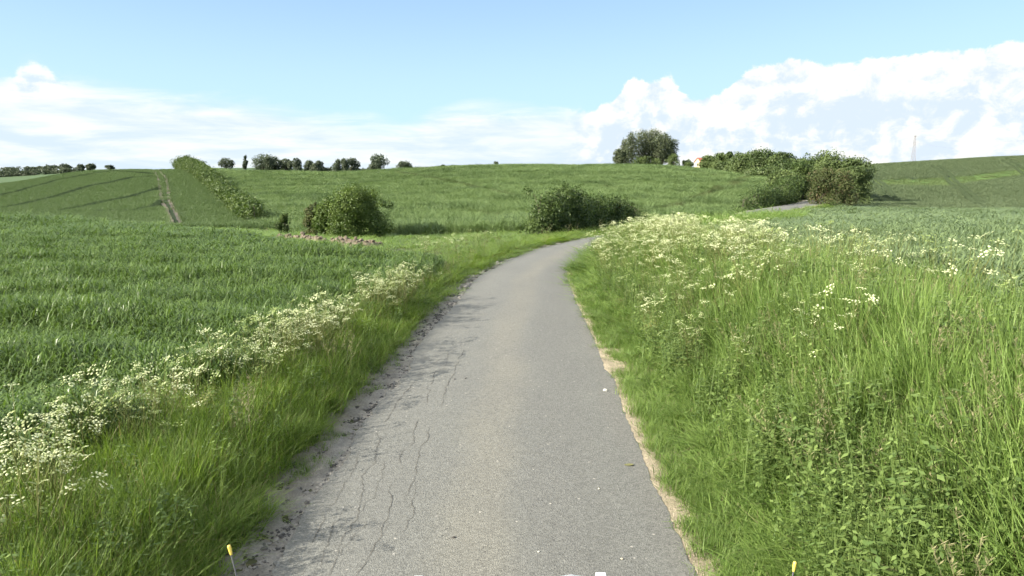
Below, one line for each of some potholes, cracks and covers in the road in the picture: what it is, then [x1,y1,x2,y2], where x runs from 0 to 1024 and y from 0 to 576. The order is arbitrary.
crack [291,350,464,574]
